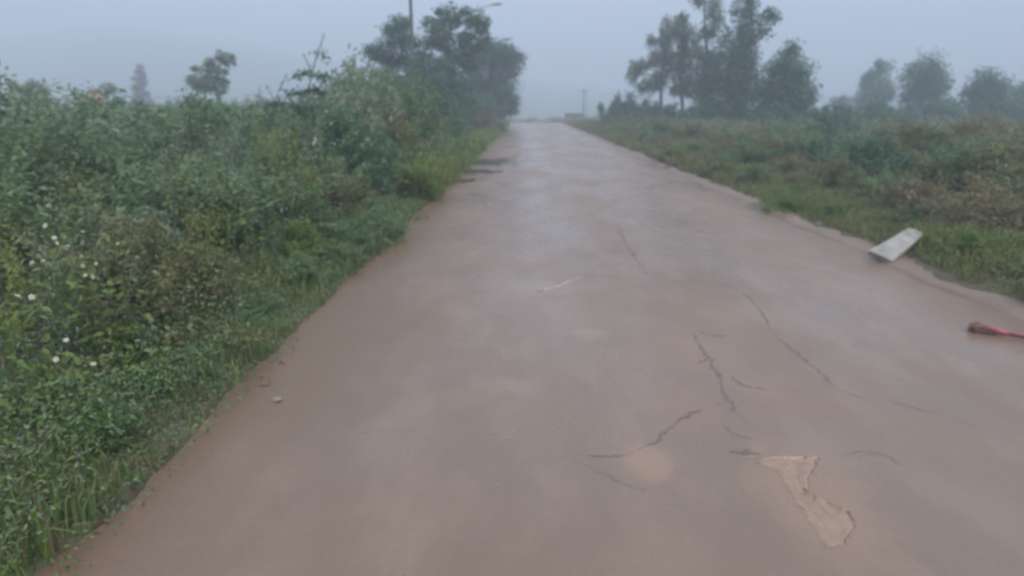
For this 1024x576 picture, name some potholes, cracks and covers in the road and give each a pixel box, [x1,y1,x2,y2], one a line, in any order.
pothole [753,455,859,548]
crack [561,226,979,492]
